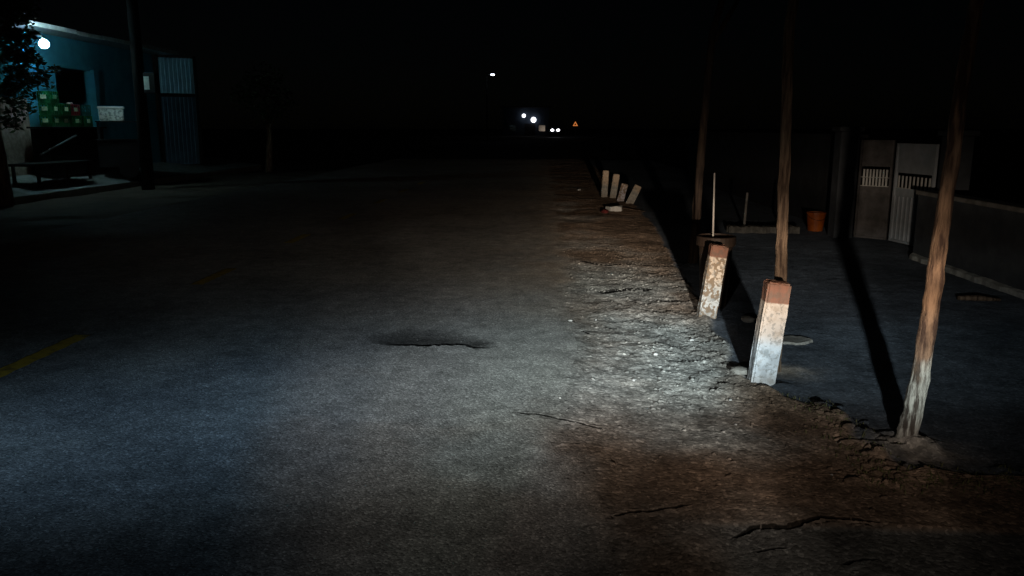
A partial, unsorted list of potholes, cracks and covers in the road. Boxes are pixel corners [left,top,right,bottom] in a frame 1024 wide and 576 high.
crack [722,513,888,570]
crack [510,409,614,447]
crack [568,259,692,296]
pothole [362,329,503,351]
crack [607,500,699,521]
